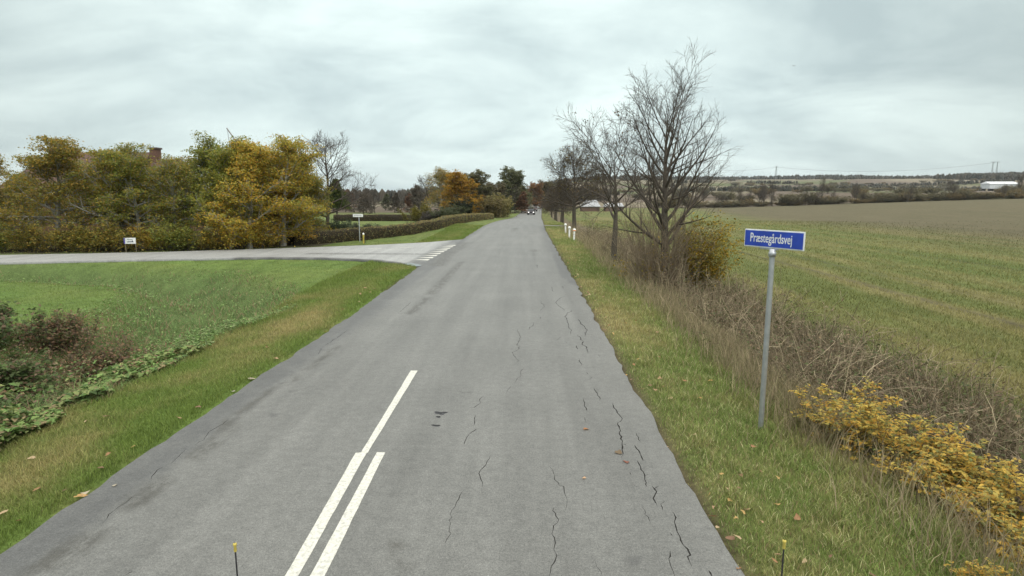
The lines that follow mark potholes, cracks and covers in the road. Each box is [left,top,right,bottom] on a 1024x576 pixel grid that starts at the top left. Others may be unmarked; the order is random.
crack [512,290,692,576]
